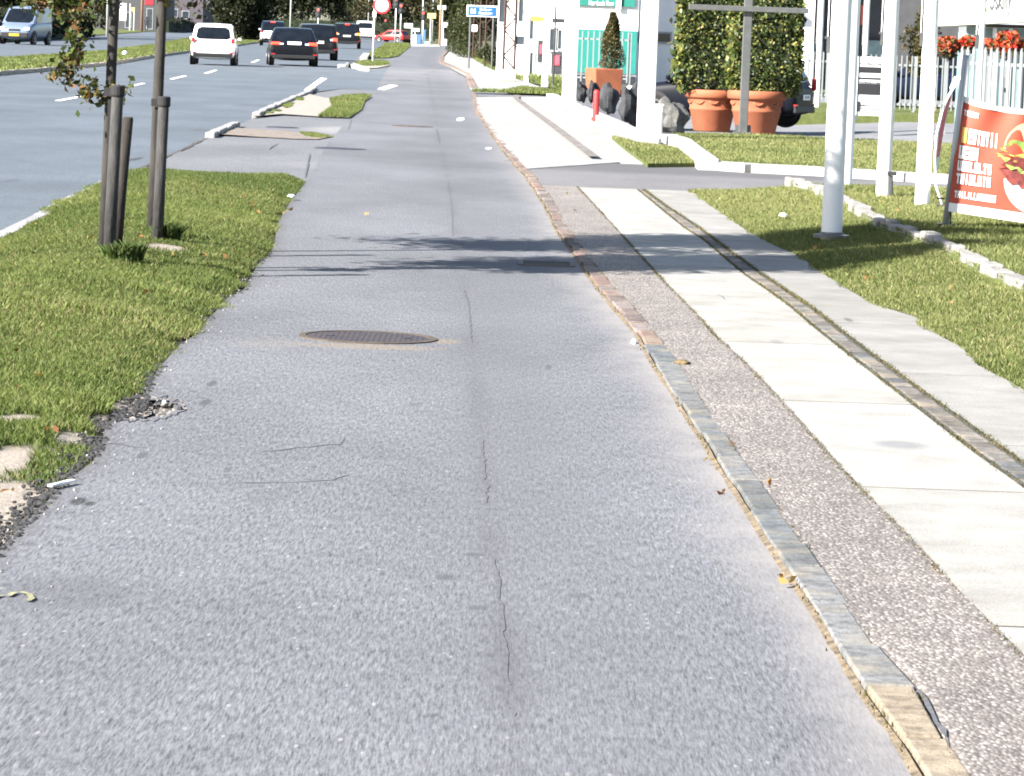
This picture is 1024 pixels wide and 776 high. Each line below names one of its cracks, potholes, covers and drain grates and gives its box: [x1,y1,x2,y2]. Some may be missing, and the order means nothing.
crack [481,440,490,503]
manhole cover [299,330,437,344]
crack [493,558,516,716]
crack [242,474,349,483]
pothole [108,395,187,422]
crack [259,437,345,452]
